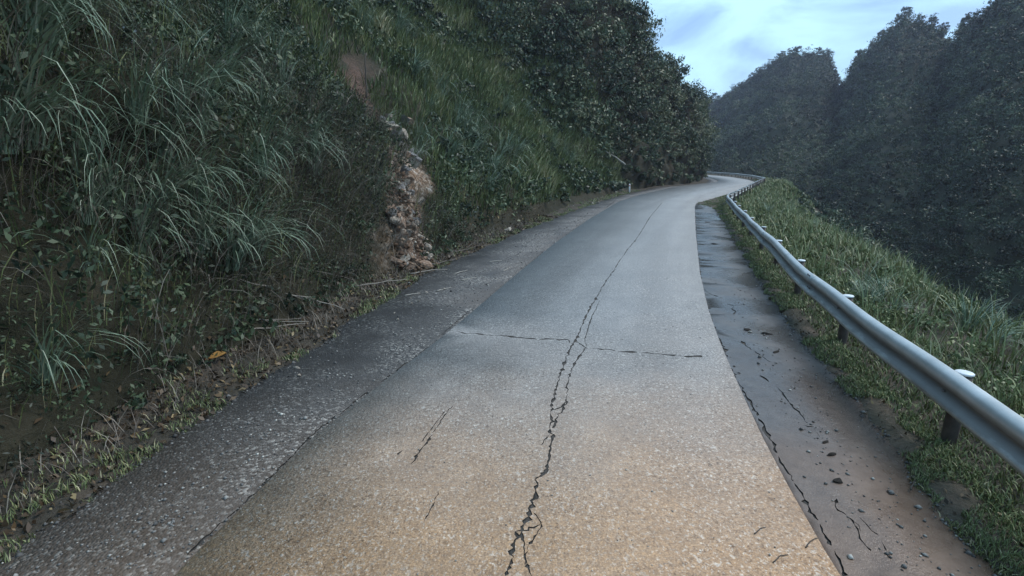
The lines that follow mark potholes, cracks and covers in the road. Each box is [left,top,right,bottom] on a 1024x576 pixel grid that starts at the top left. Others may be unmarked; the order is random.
crack [450,203,886,576]
